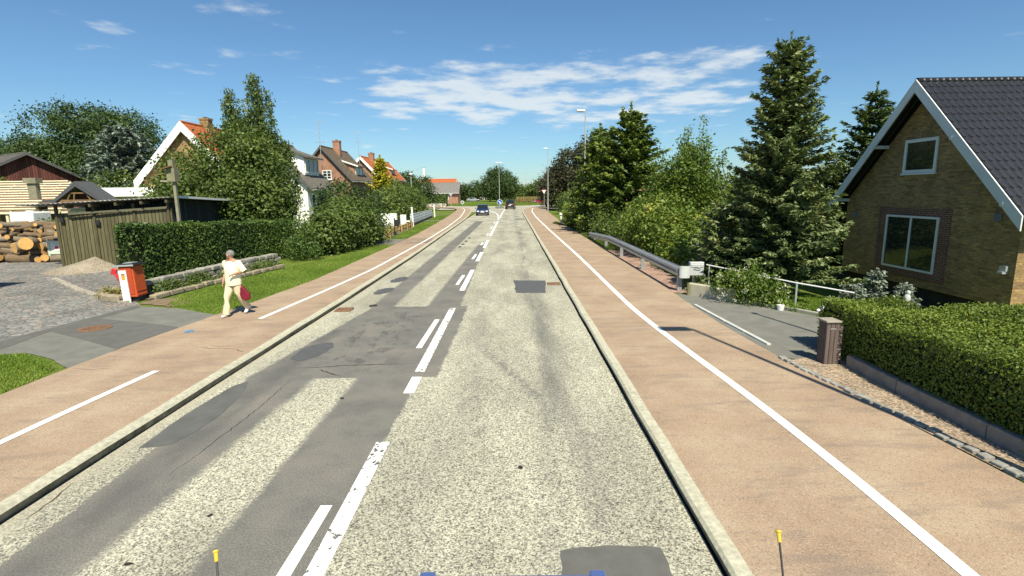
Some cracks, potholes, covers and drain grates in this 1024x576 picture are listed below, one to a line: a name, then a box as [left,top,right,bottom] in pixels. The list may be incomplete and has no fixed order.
crack [310,363,412,376]
crack [174,384,286,471]
crack [28,483,72,518]
